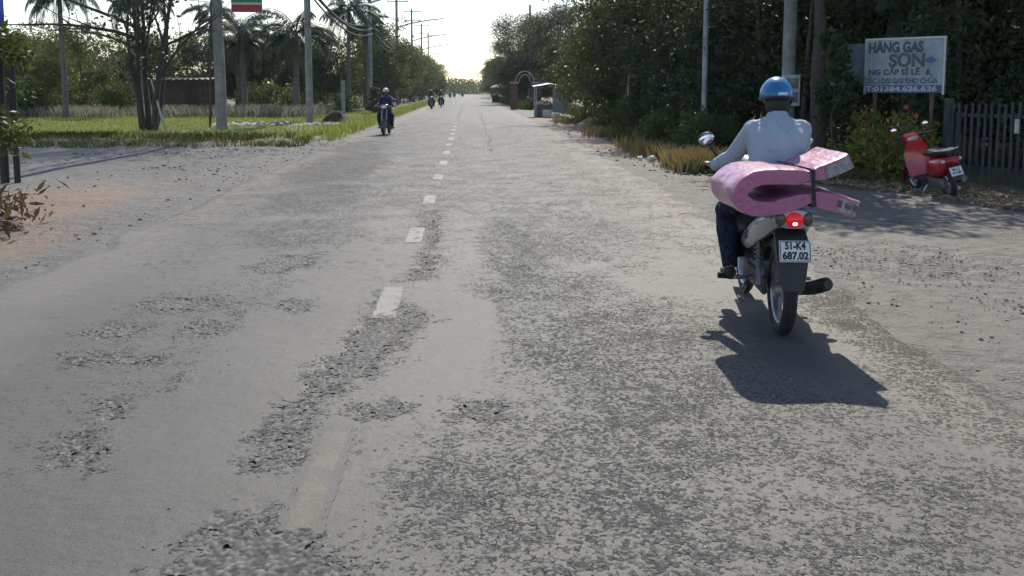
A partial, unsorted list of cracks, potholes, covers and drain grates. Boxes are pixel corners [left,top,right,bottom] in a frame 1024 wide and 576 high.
pothole [290,288,445,385]
pothole [73,392,139,424]
pothole [127,294,251,317]
pothole [420,395,539,430]
pothole [53,344,174,369]
pothole [55,321,155,342]
pothole [258,297,322,314]
pothole [137,494,385,576]
pothole [238,250,336,276]
crack [477,109,492,152]
pothole [232,377,358,477]
pothole [169,319,232,346]
